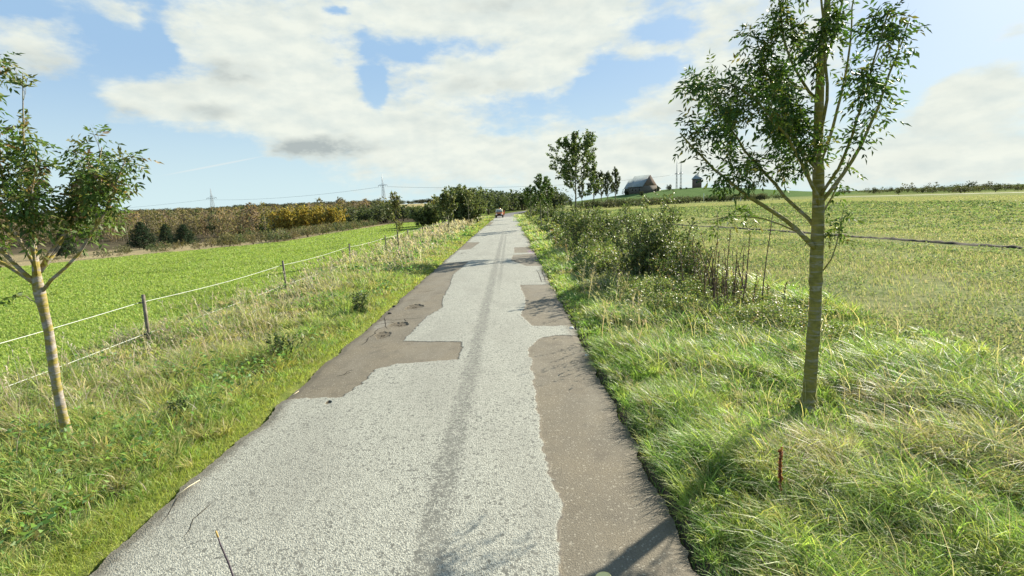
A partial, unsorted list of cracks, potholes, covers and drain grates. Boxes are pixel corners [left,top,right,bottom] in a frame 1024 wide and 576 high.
pothole [373,331,393,341]
